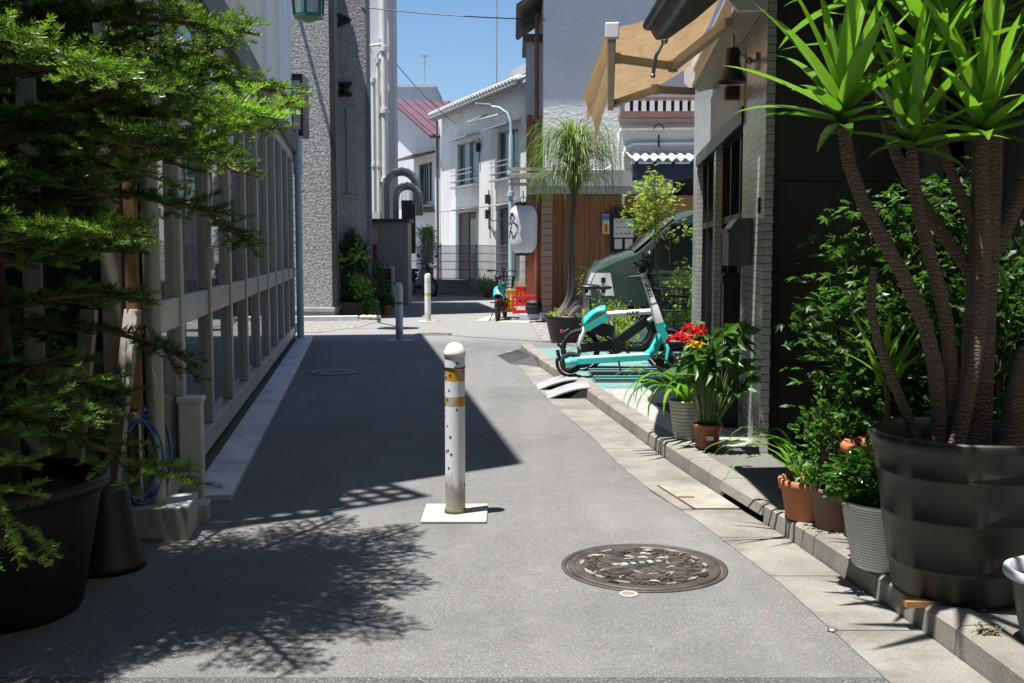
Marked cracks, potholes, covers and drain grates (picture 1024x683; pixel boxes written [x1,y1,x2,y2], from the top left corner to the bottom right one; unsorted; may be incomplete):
manhole cover [561,544,728,593]
